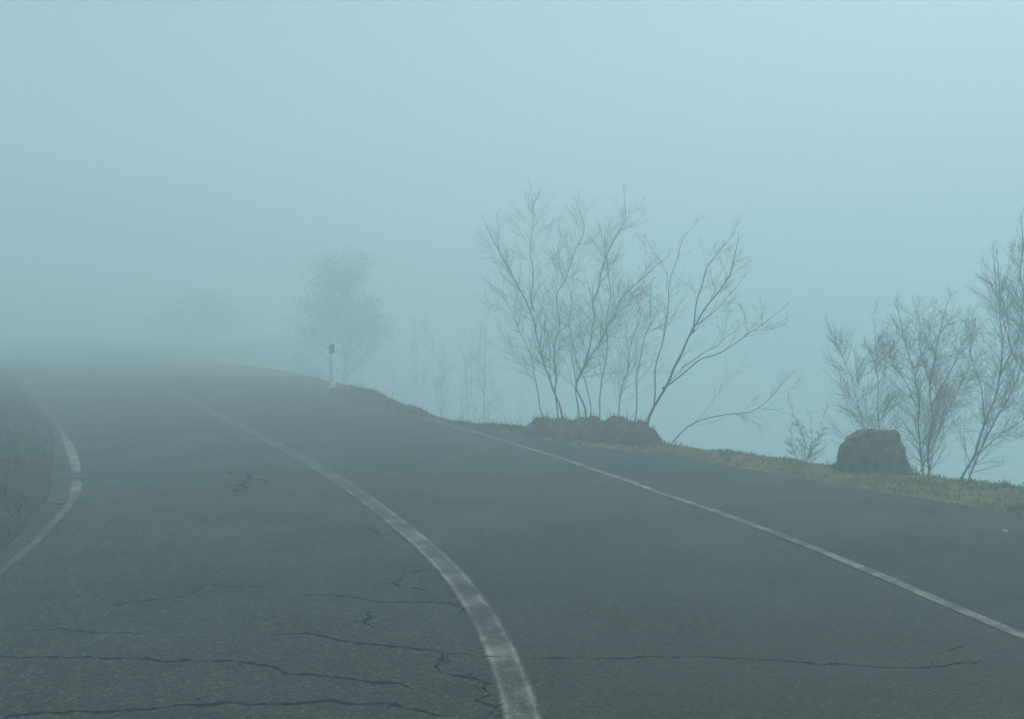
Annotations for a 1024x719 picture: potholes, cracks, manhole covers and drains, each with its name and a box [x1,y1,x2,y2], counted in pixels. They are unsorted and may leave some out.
crack [529,646,982,669]
crack [226,471,269,493]
crack [0,568,501,719]
